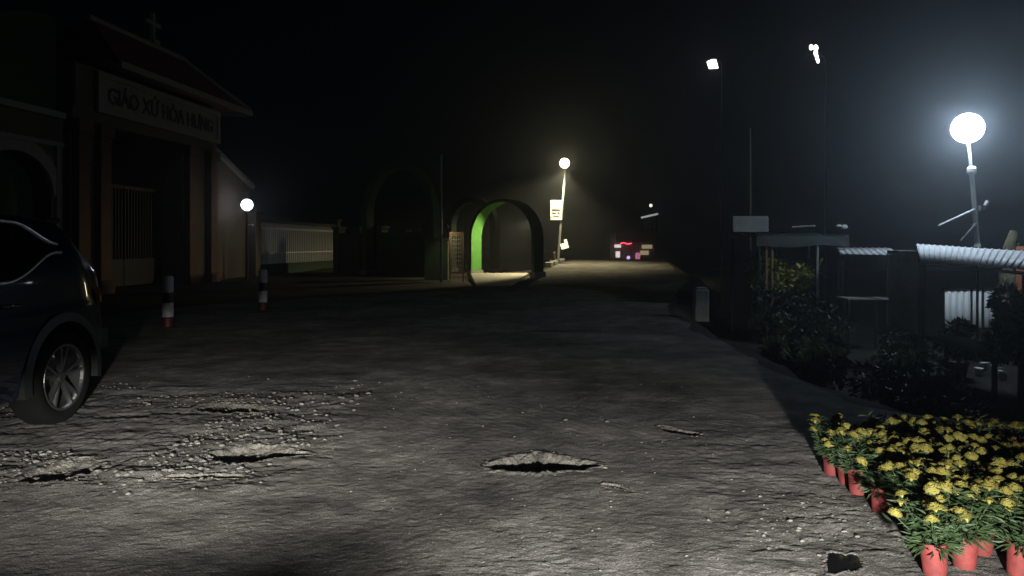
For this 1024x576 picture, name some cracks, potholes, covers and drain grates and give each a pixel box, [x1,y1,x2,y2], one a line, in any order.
pothole [480,450,607,477]
crack [159,472,255,481]
pothole [186,401,274,415]
pothole [819,549,869,576]
pothole [203,442,320,465]
pothole [7,455,115,486]
